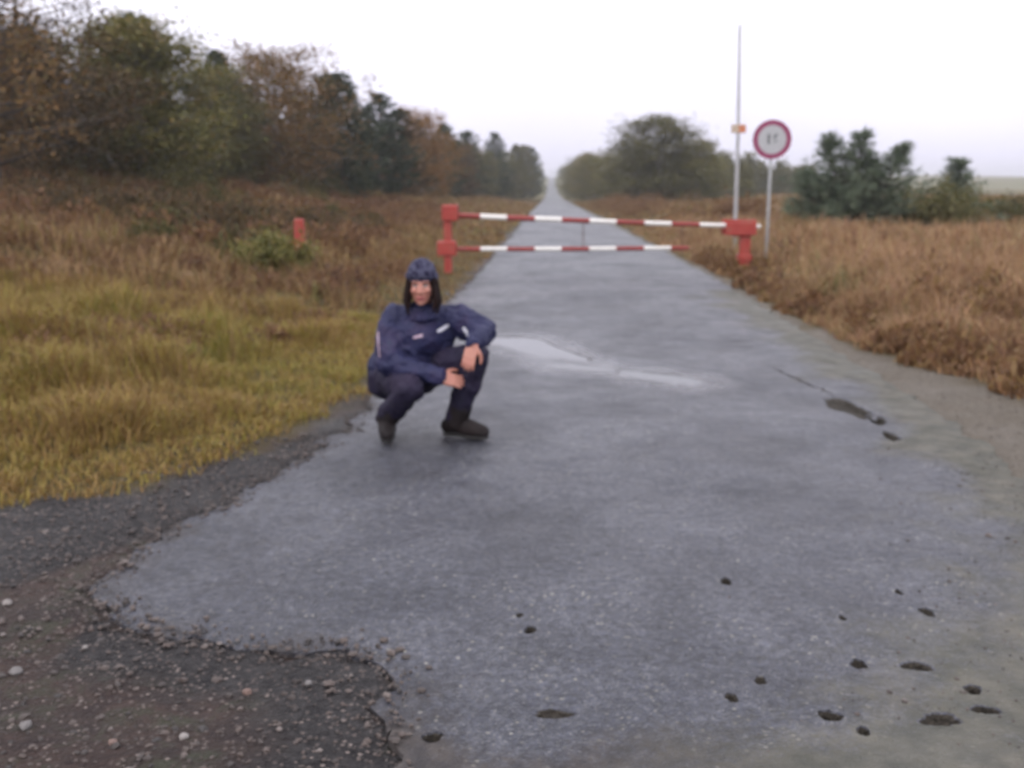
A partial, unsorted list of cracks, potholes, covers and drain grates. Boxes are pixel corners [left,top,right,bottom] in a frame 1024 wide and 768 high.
pothole [916,712,964,727]
pothole [856,725,871,736]
pothole [817,709,845,721]
pothole [421,731,444,743]
pothole [969,705,1004,714]
pothole [865,414,888,425]
pothole [849,658,869,669]
pothole [724,692,739,703]
pothole [820,396,877,421]
crack [771,367,833,395]
pothole [881,430,902,441]
pothole [896,661,936,671]
